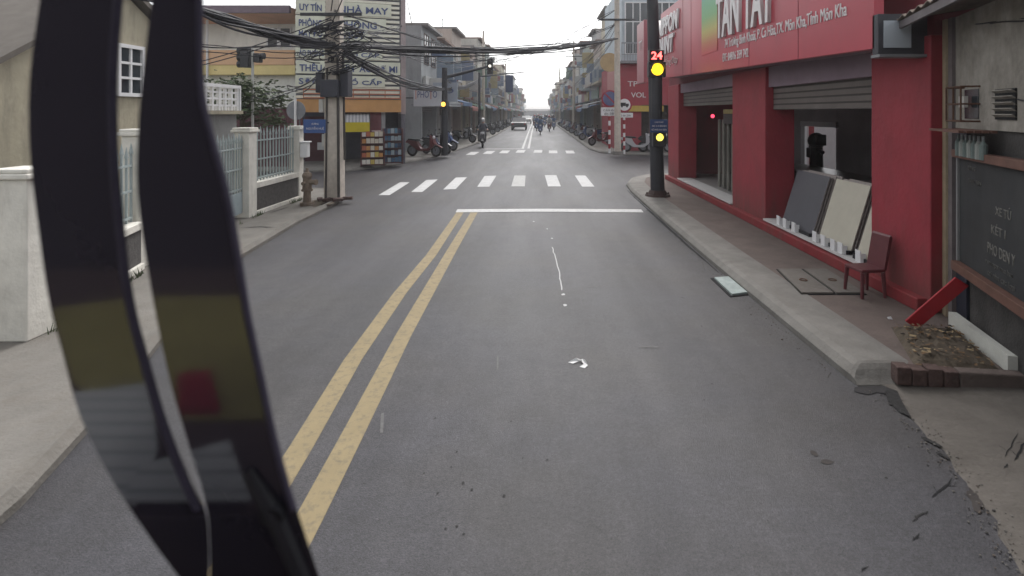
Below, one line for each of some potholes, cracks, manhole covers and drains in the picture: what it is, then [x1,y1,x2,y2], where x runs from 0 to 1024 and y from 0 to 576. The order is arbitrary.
crack [1004,434,1024,468]
crack [912,478,957,540]
